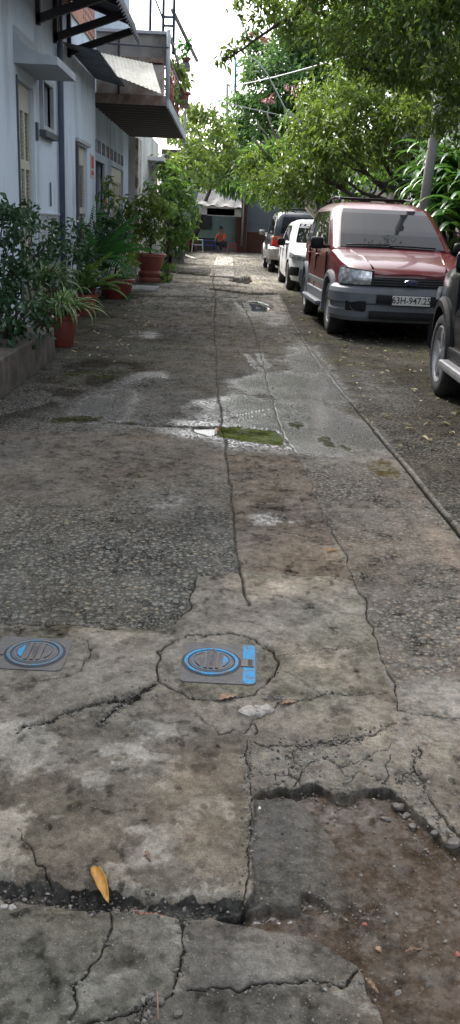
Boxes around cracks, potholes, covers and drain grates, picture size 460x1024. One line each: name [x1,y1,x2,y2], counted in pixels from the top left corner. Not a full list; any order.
manhole cover [179,642,256,686]
crack [68,912,358,1024]
manhole cover [0,636,73,672]
crack [0,517,460,911]
pothole [215,783,460,1024]
